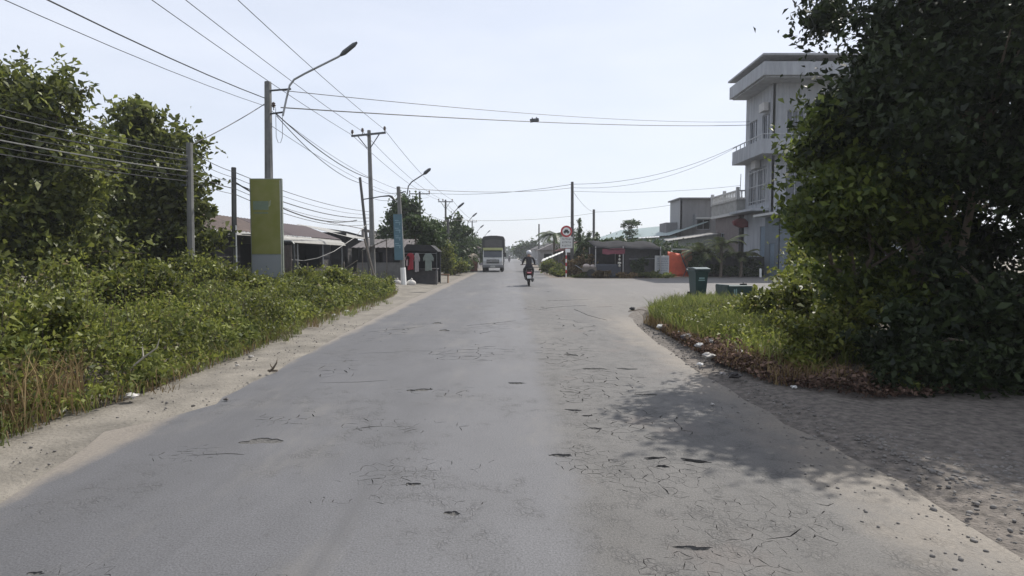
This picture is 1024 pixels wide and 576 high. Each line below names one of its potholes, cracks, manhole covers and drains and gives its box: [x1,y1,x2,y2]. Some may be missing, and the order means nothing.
crack [429,299,843,576]
crack [310,458,481,504]
